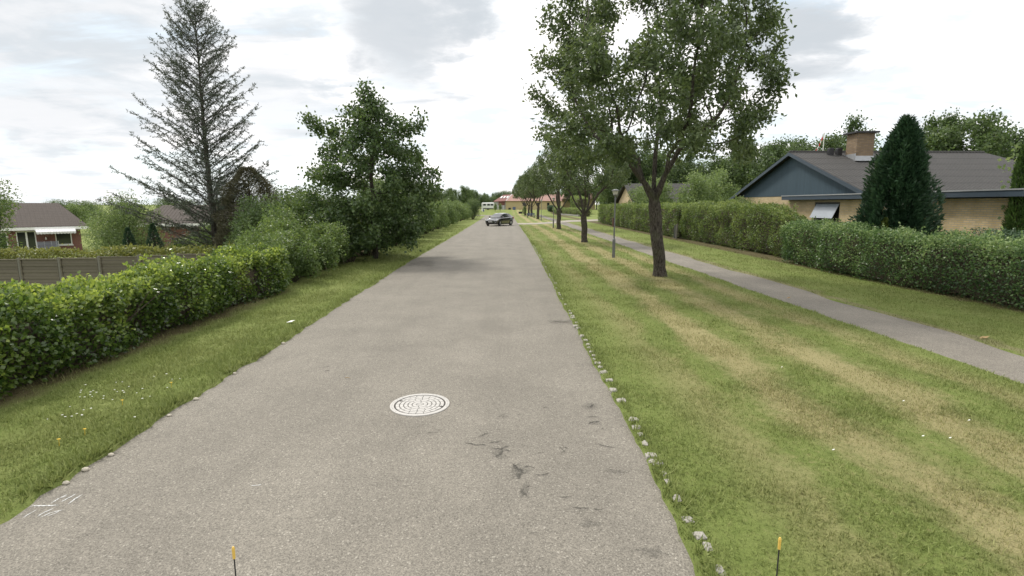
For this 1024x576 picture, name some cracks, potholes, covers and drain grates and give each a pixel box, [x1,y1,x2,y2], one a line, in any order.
manhole cover [390,393,450,417]
